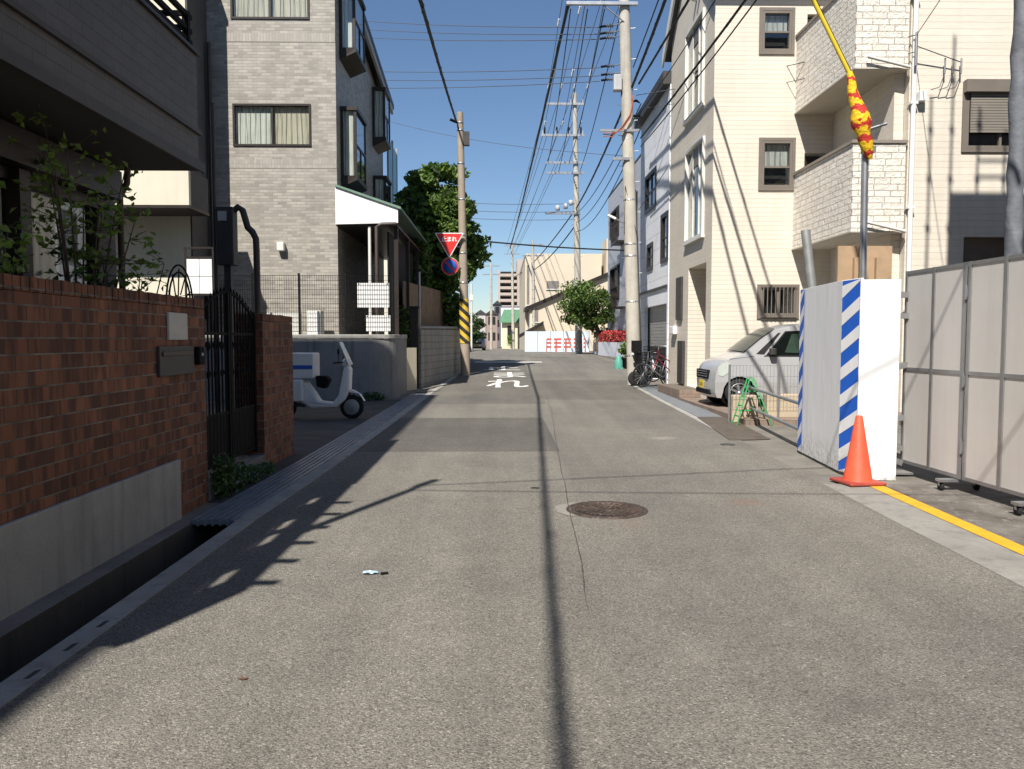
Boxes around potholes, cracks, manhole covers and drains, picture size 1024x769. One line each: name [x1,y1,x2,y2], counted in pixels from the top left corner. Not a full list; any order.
manhole cover [566,501,648,519]
